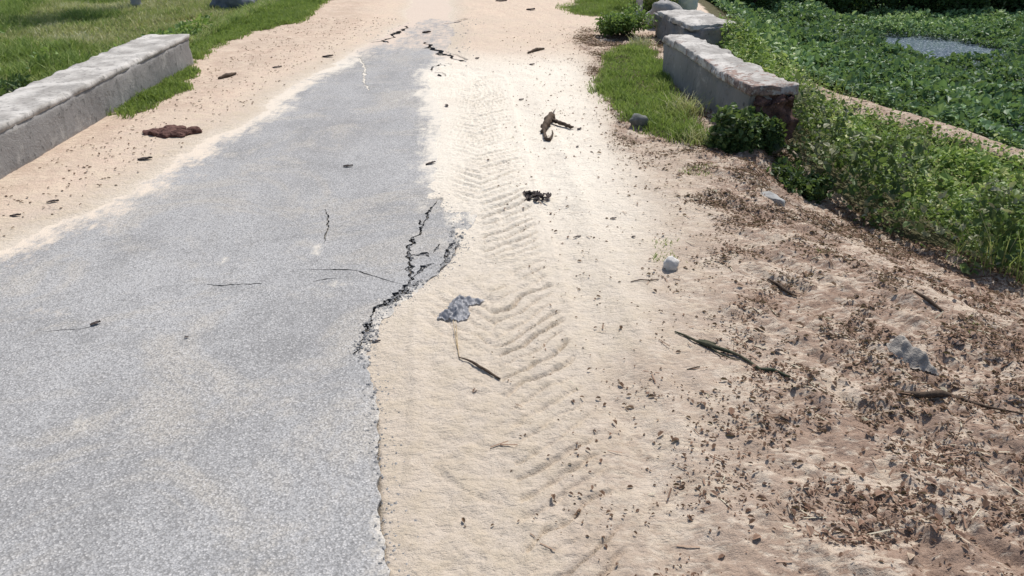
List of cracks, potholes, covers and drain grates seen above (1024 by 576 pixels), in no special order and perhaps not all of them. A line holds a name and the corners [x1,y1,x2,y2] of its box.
crack [359,27,464,90]
crack [312,202,462,357]
